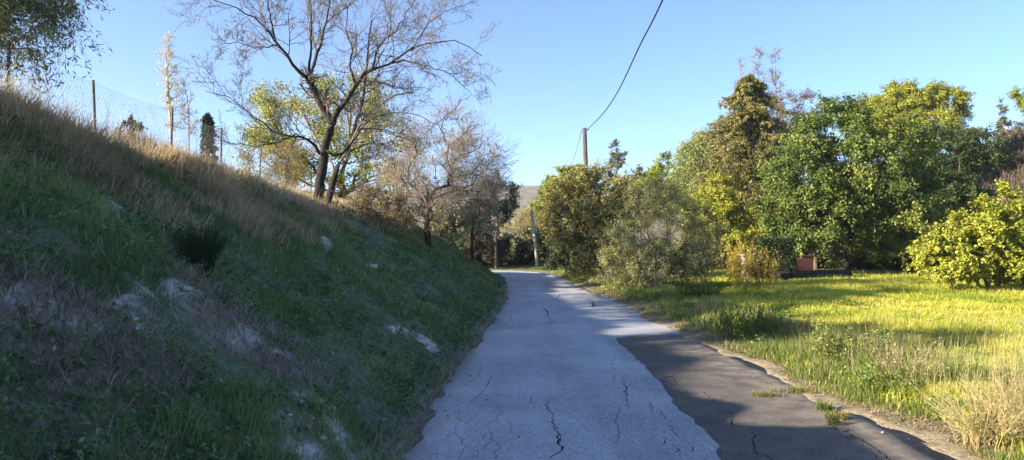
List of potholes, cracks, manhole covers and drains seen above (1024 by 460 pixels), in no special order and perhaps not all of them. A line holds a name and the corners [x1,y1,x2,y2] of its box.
crack [442,367,520,459]
crack [530,381,564,459]
crack [612,356,628,441]
crack [703,392,773,460]
